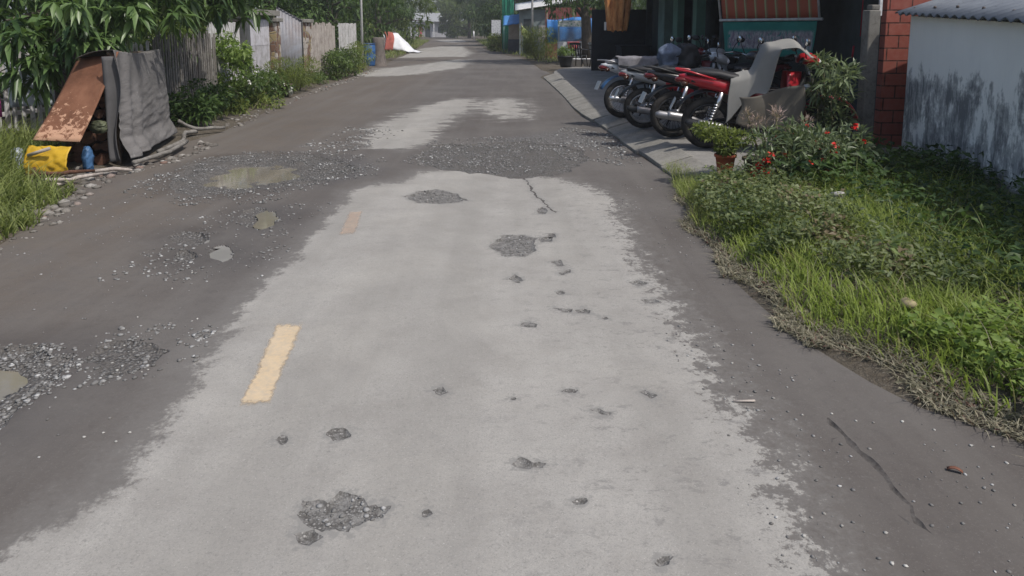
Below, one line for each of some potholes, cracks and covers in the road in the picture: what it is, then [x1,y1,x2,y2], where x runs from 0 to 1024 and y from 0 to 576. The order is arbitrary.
pothole [403,189,469,204]
crack [523,178,556,213]
pothole [294,529,323,546]
crack [827,418,932,534]
pothole [0,344,75,428]
pothole [297,491,391,532]
pothole [240,207,280,230]
pothole [489,235,538,257]
pothole [326,428,351,441]
pothole [512,457,546,469]
